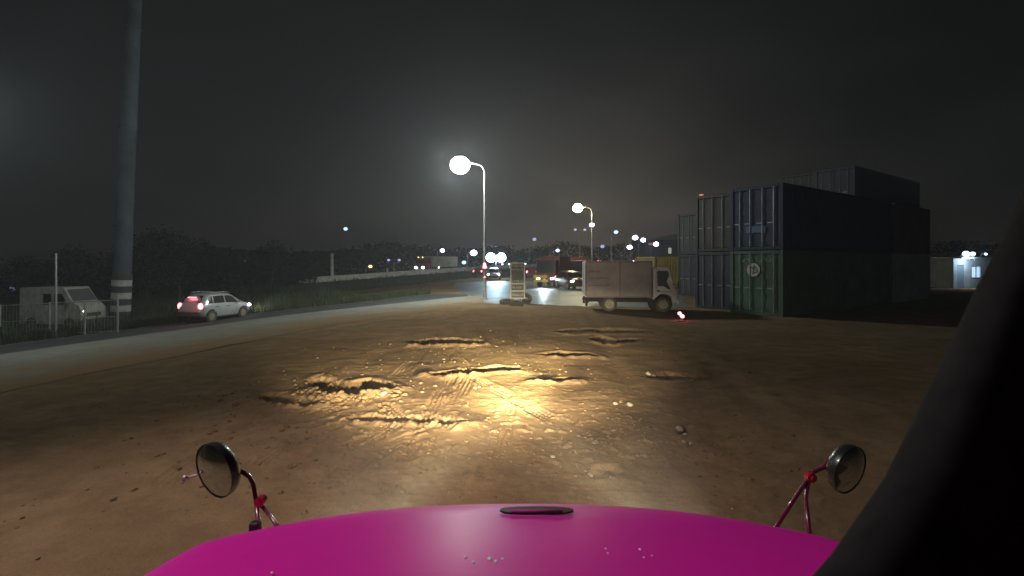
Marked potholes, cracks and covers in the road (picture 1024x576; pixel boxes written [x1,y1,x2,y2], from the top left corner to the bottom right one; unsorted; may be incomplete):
pothole [424,365,522,376]
pothole [638,371,723,382]
pothole [586,335,642,344]
pothole [303,374,401,395]
pothole [405,337,487,345]
pothole [346,413,474,427]
